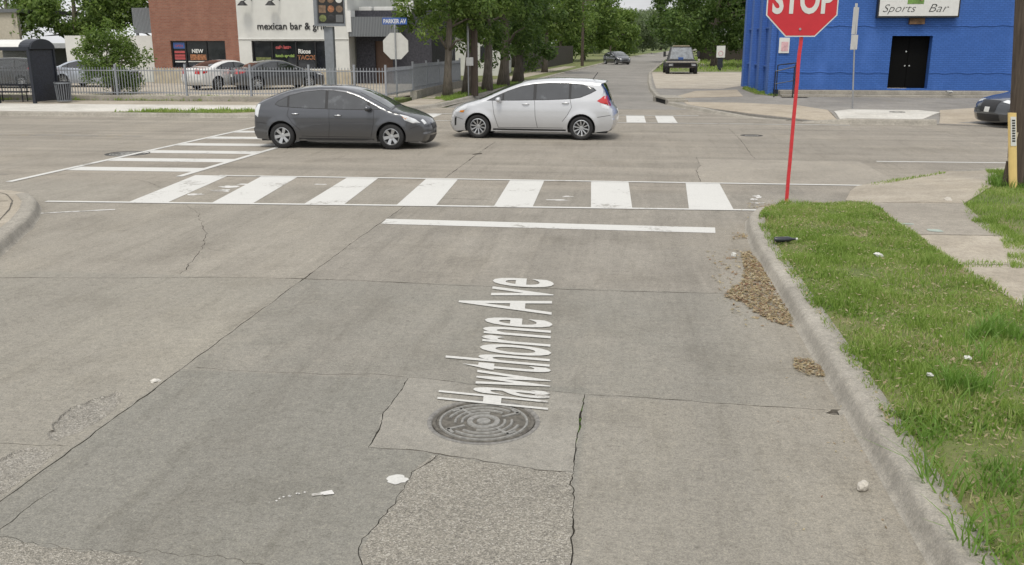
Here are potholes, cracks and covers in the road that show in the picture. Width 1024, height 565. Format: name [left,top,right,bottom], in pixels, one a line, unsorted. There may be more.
crack [0,208,772,565]
manhole cover [427,399,540,445]
